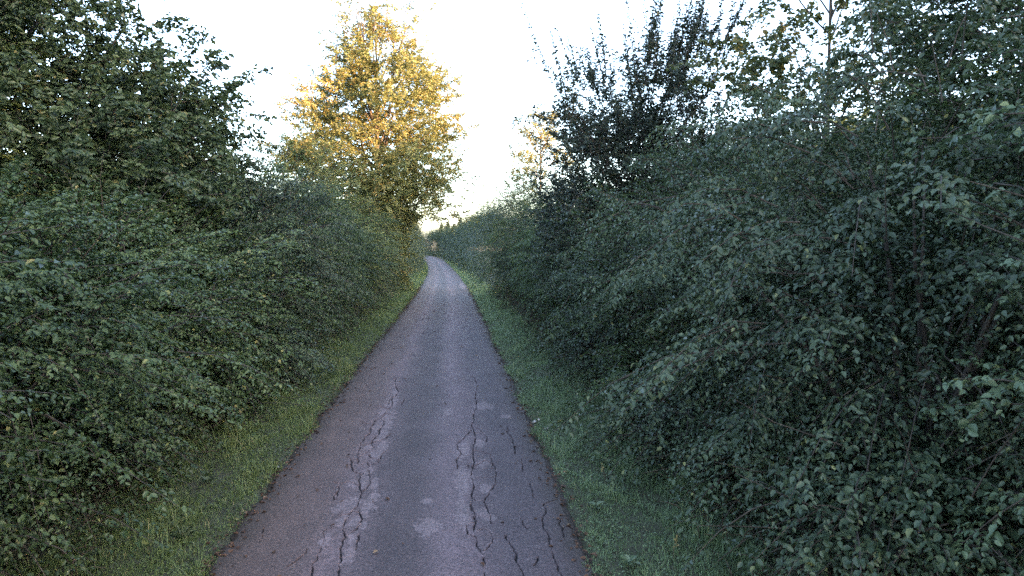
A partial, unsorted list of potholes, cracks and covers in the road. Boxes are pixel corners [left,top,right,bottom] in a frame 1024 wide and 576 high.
crack [455,376,565,576]
crack [286,374,405,576]
